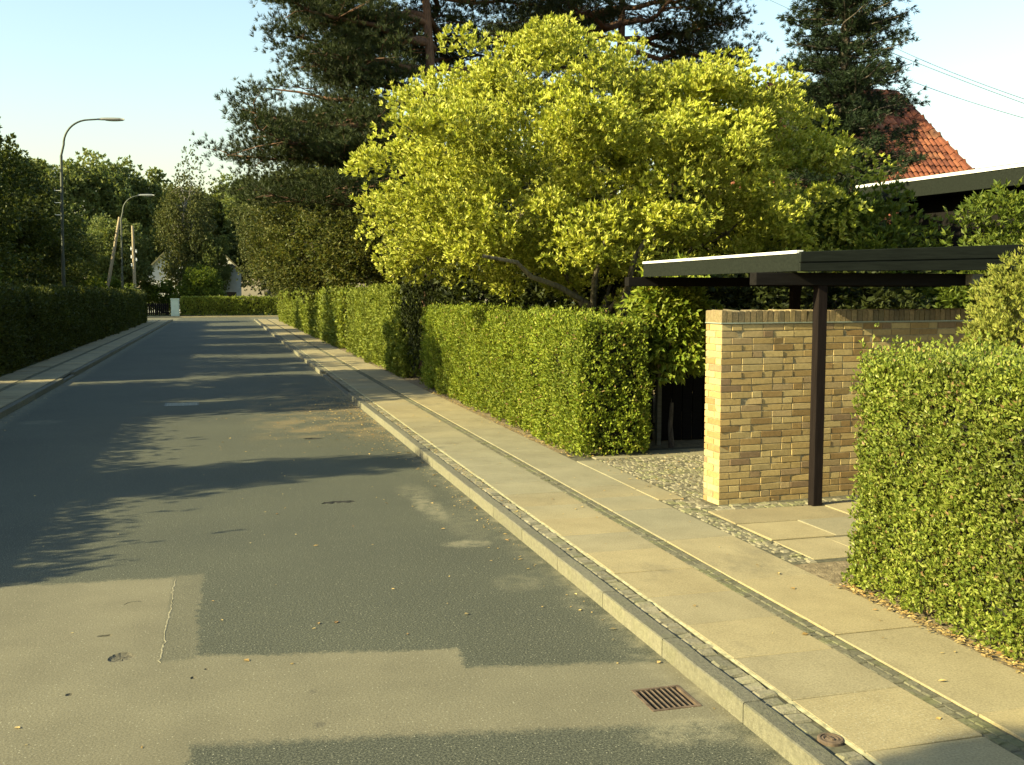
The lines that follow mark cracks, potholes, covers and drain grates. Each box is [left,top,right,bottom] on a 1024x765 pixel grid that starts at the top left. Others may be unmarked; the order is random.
drain grate [631,685,702,712]
pothole [108,652,135,662]
manhole cover [817,733,844,747]
